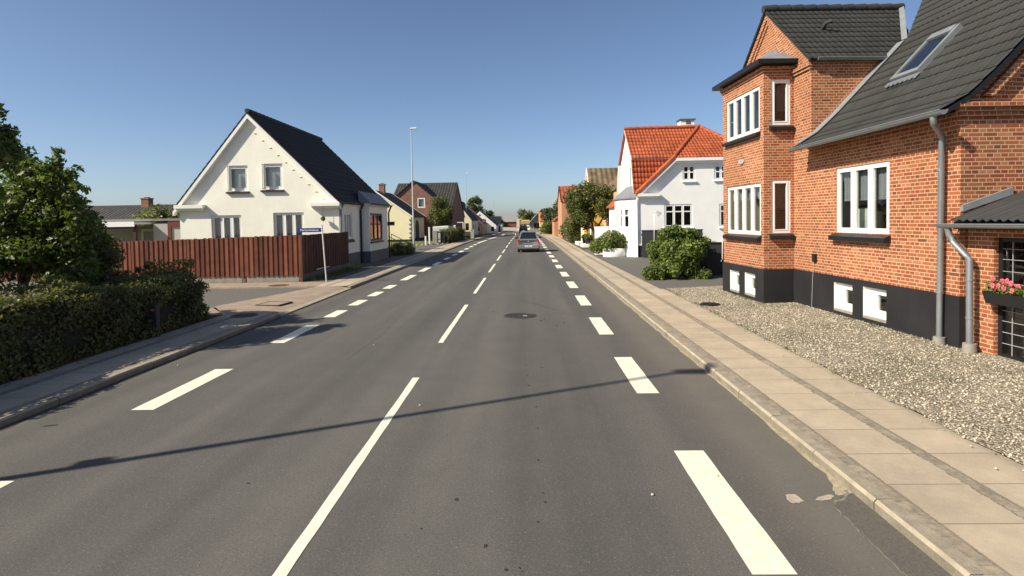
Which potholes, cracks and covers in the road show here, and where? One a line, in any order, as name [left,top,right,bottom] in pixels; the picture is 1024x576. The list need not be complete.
crack [834,490,907,576]
